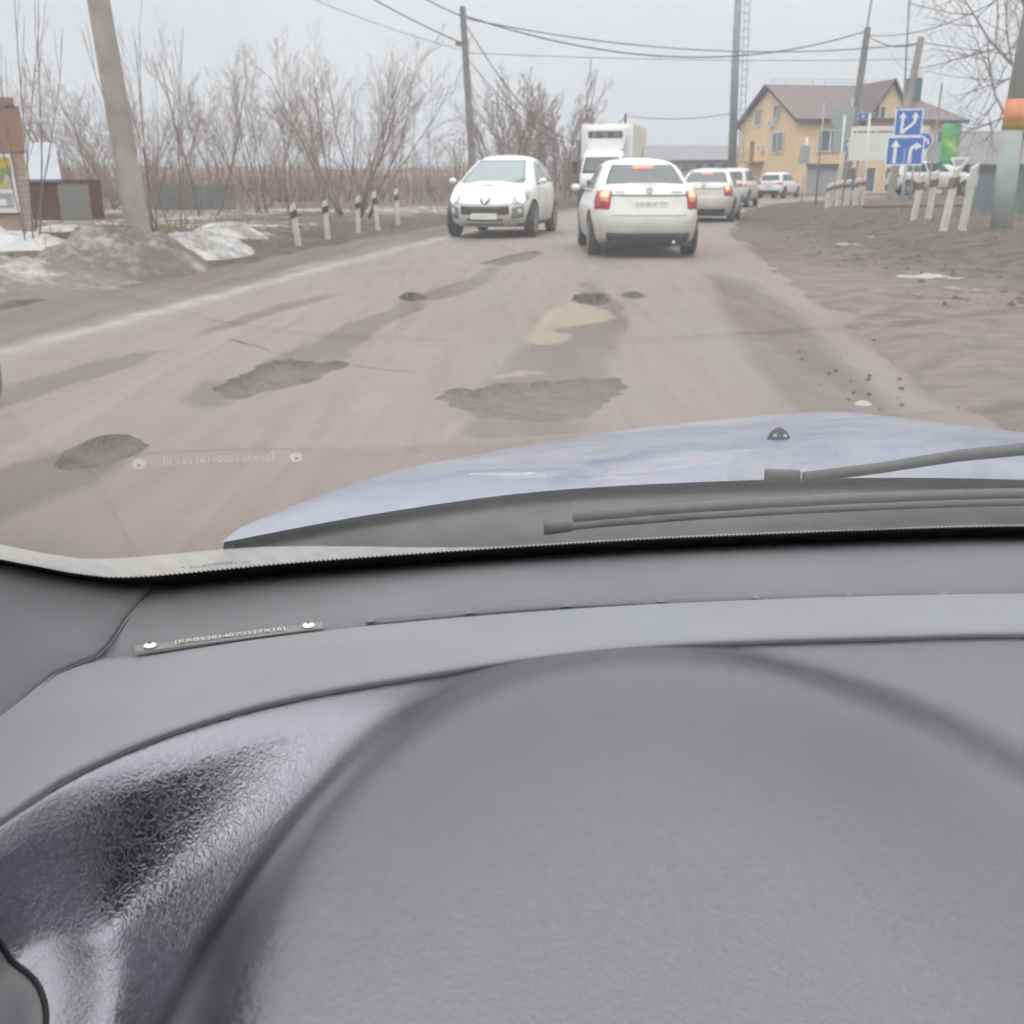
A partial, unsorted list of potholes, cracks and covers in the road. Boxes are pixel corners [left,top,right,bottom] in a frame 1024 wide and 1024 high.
pothole [54,434,150,470]
pothole [212,358,350,400]
pothole [571,293,611,305]
pothole [435,378,628,422]
crack [231,339,416,373]
pothole [398,292,428,302]
pothole [621,291,646,299]
